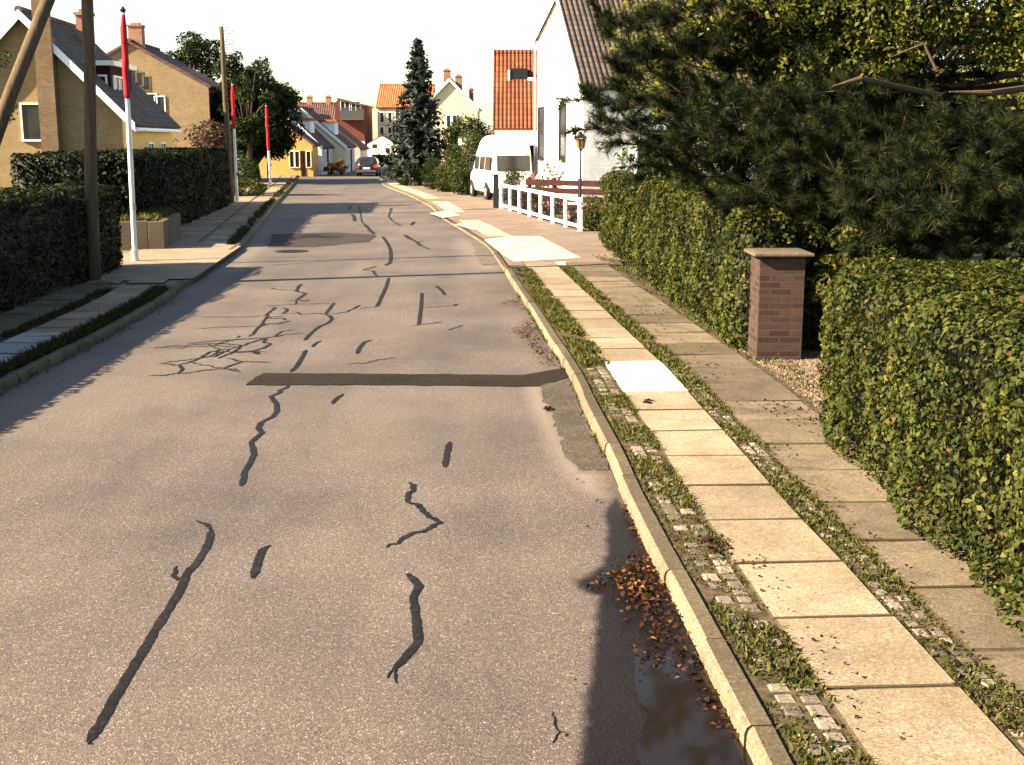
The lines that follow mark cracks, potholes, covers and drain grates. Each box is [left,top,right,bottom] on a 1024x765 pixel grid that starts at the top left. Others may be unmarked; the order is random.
crack [415,293,464,330]
crack [280,205,465,265]
crack [151,284,329,376]
crack [551,711,568,743]
